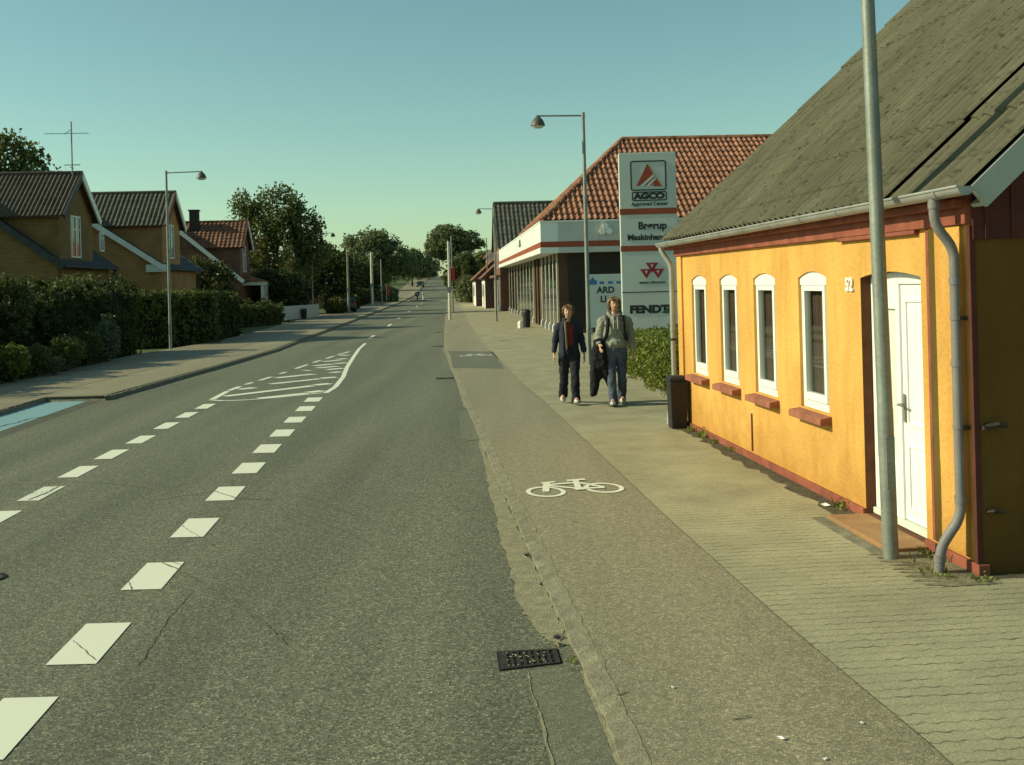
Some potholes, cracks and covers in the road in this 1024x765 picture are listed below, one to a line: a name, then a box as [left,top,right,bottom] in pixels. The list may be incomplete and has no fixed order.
crack [162,560,286,644]
drain grate [496,648,562,671]
